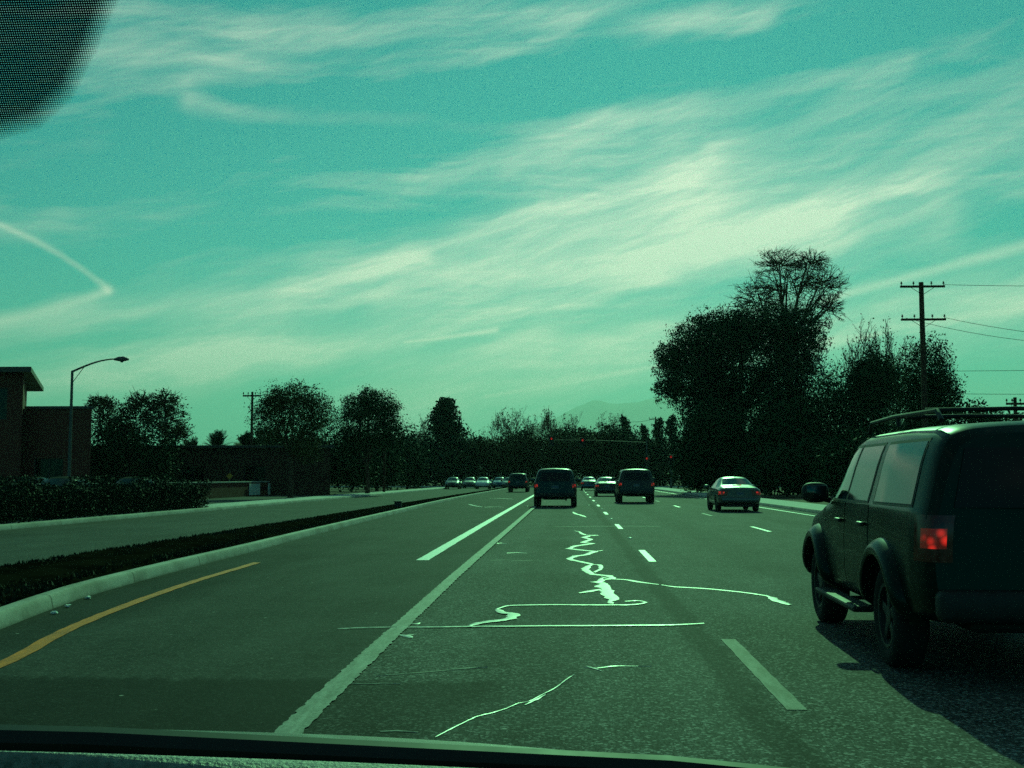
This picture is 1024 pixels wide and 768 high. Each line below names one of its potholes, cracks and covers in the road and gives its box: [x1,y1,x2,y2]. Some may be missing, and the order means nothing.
crack [352,666,488,684]
crack [435,666,613,737]
